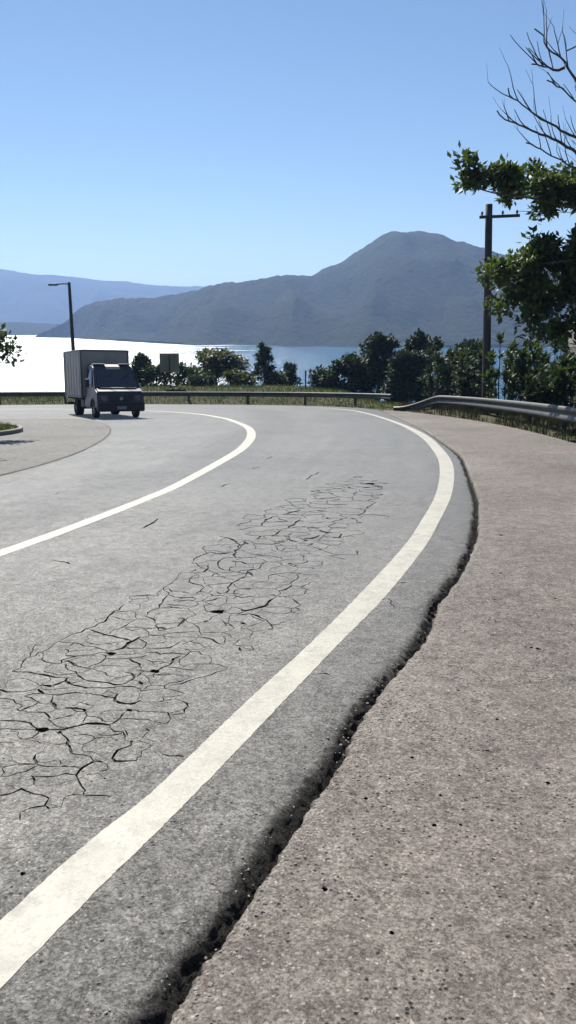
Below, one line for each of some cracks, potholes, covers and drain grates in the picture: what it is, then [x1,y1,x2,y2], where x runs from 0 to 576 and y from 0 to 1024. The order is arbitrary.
crack [0,476,389,820]
